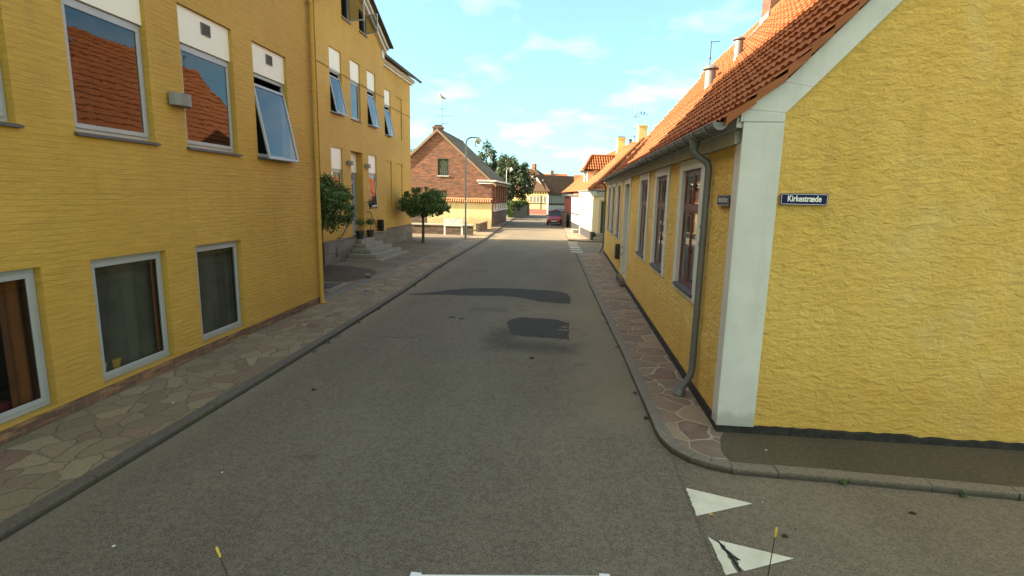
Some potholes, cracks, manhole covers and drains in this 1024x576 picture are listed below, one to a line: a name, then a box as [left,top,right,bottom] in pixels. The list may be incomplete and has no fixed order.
crack [717,540,741,572]
